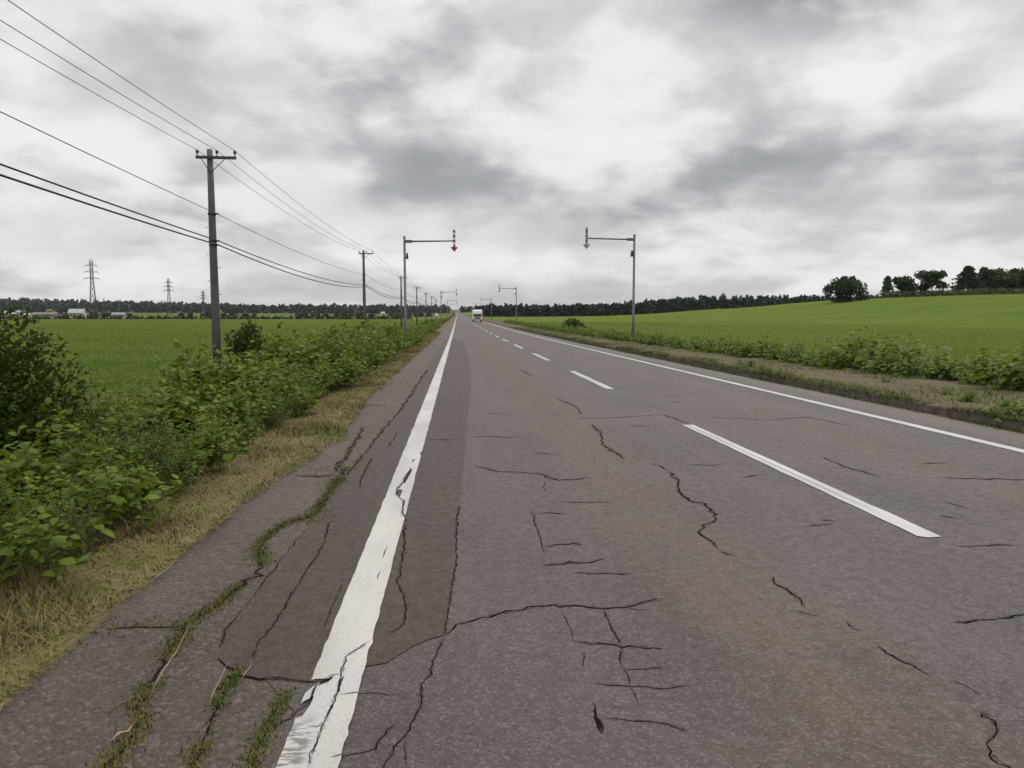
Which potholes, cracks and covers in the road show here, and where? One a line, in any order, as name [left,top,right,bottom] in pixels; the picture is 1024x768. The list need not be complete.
crack [476,466,583,488]
crack [556,395,689,459]
crack [876,644,977,693]
crack [652,463,731,556]
crack [952,614,1024,624]
crack [979,711,1010,768]
crack [343,598,686,768]
crack [103,427,372,768]
crack [773,577,809,615]
crack [531,512,625,575]
